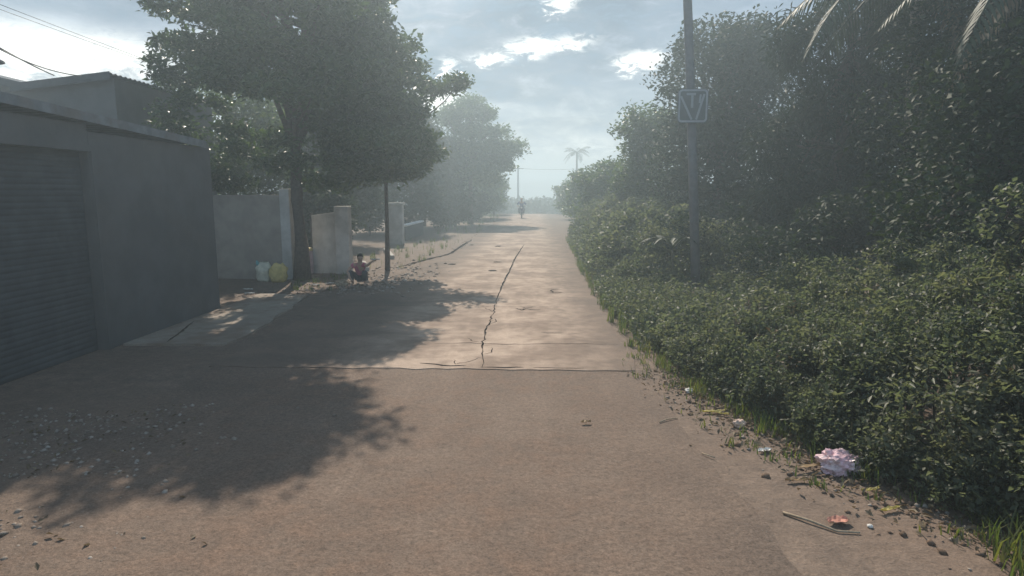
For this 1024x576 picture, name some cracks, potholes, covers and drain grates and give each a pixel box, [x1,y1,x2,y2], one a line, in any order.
crack [422,245,618,368]
